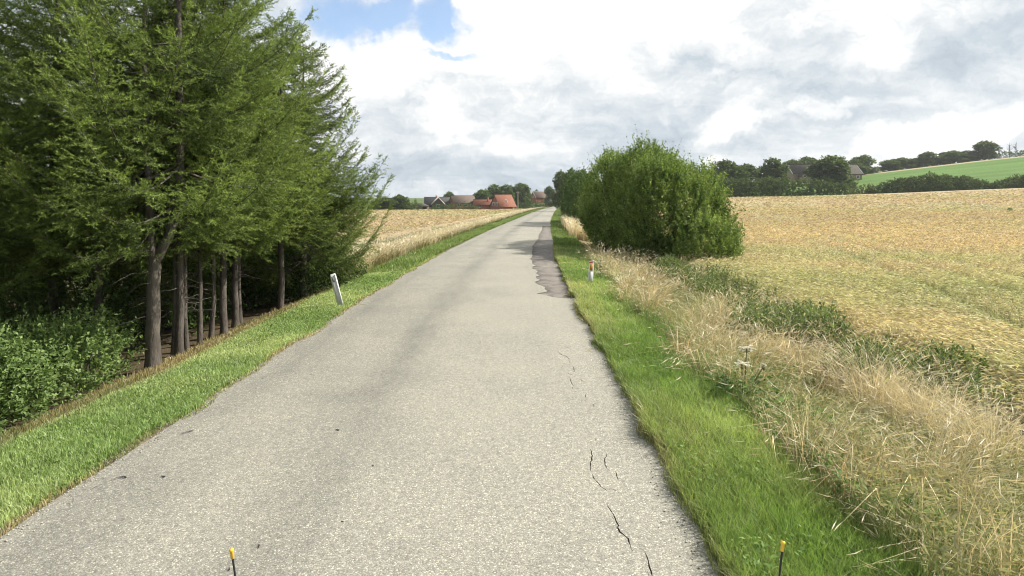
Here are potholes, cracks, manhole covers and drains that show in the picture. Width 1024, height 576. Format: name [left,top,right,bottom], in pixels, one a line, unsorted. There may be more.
crack [590,451,652,575]
